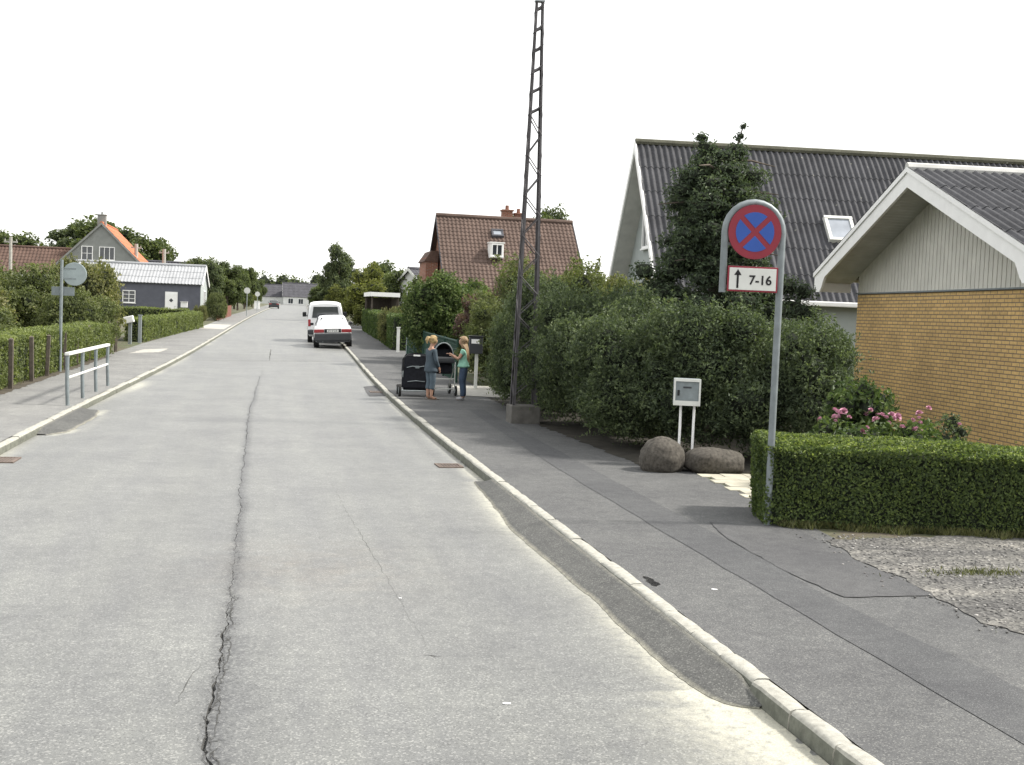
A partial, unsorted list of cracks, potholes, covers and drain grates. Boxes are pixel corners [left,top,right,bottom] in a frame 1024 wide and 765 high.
crack [172,378,260,765]
